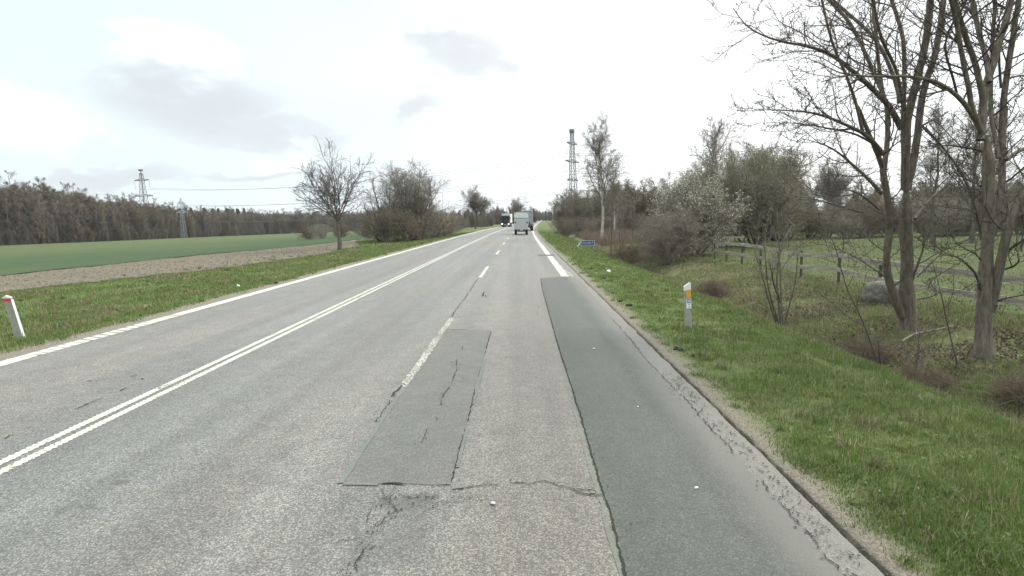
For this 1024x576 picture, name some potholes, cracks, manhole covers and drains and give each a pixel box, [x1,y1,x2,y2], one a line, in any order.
crack [336,279,631,576]
crack [611,317,865,576]
